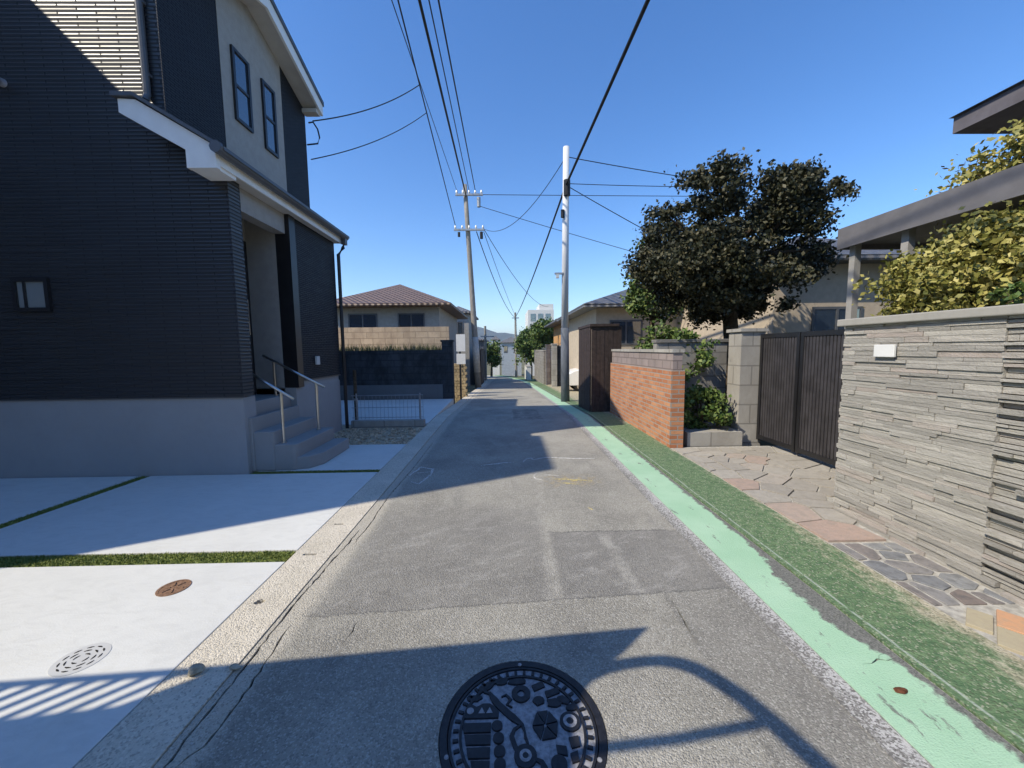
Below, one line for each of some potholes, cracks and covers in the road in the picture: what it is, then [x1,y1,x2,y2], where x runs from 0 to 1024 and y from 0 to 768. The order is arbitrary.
crack [169,443,433,764]
drain grate [48,642,112,677]
manhole cover [439,661,608,768]
